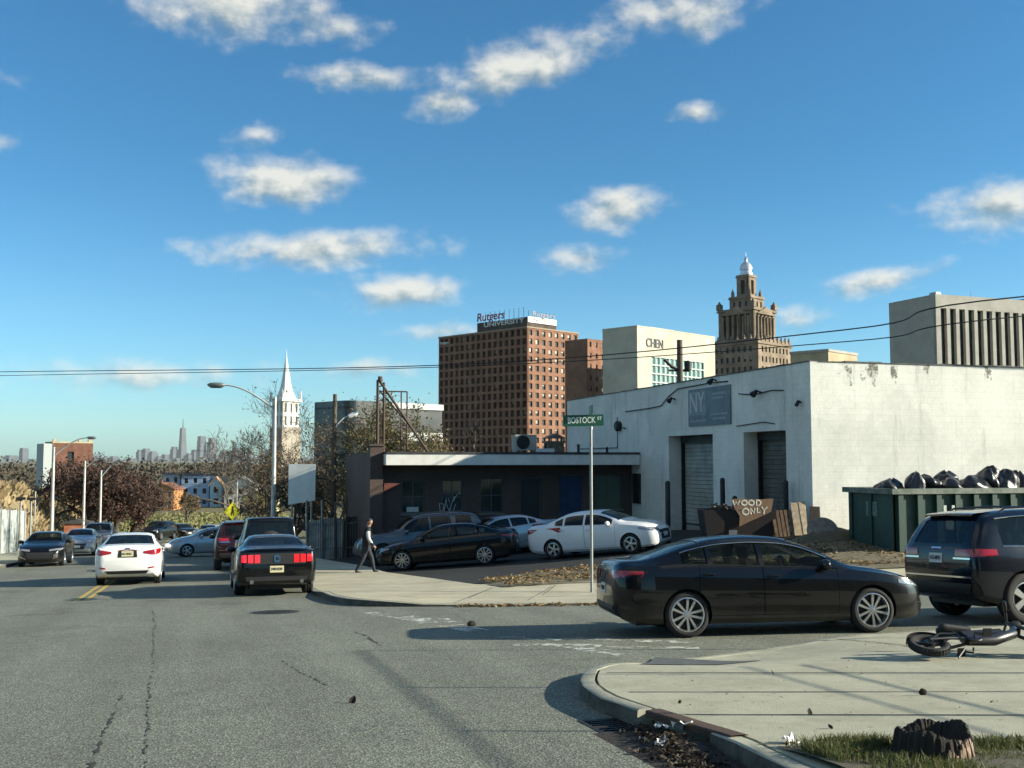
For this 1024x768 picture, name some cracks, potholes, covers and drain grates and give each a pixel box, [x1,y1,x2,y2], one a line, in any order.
drain grate [577,708,747,738]
crack [87,695,123,768]
